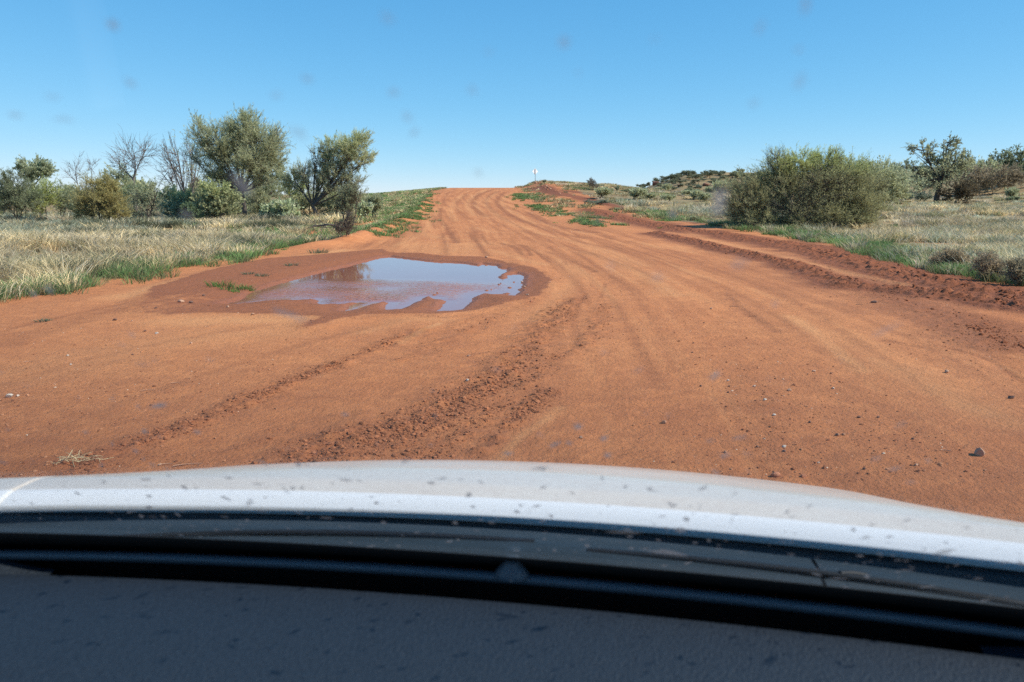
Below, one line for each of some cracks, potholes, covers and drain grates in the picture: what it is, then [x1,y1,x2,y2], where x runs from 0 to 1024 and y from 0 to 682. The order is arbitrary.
pothole [215,253,536,316]
